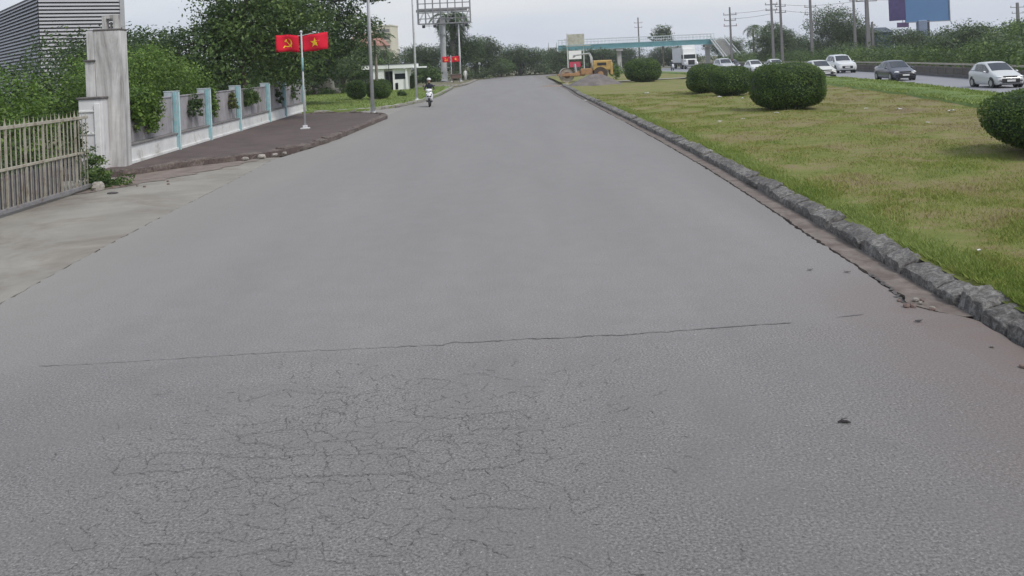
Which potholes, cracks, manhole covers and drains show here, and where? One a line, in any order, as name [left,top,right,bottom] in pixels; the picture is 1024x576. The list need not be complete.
crack [49,323,779,366]
